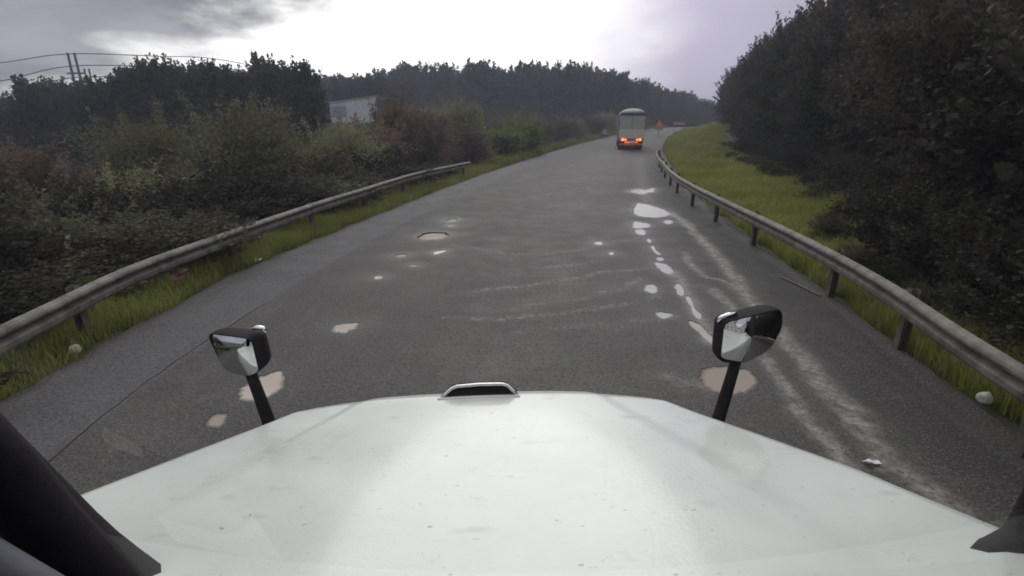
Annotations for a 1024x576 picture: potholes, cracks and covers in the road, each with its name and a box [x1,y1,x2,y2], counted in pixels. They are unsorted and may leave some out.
pothole [417,232,449,240]
